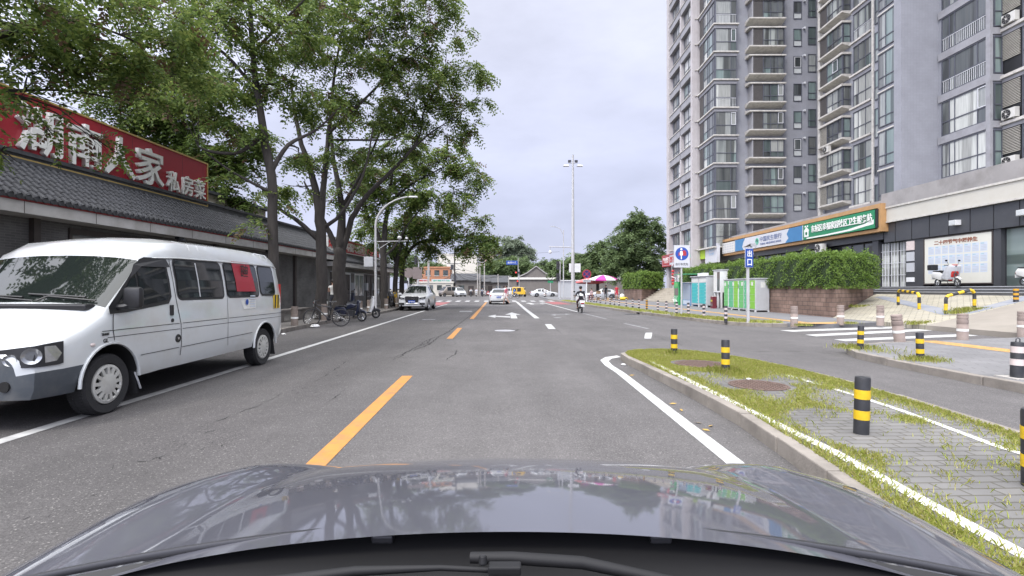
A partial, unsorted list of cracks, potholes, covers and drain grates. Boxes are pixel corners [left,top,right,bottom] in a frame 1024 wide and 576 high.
crack [202,358,352,449]
manhole cover [674,360,721,368]
crack [393,310,477,360]
manhole cover [728,380,790,391]
